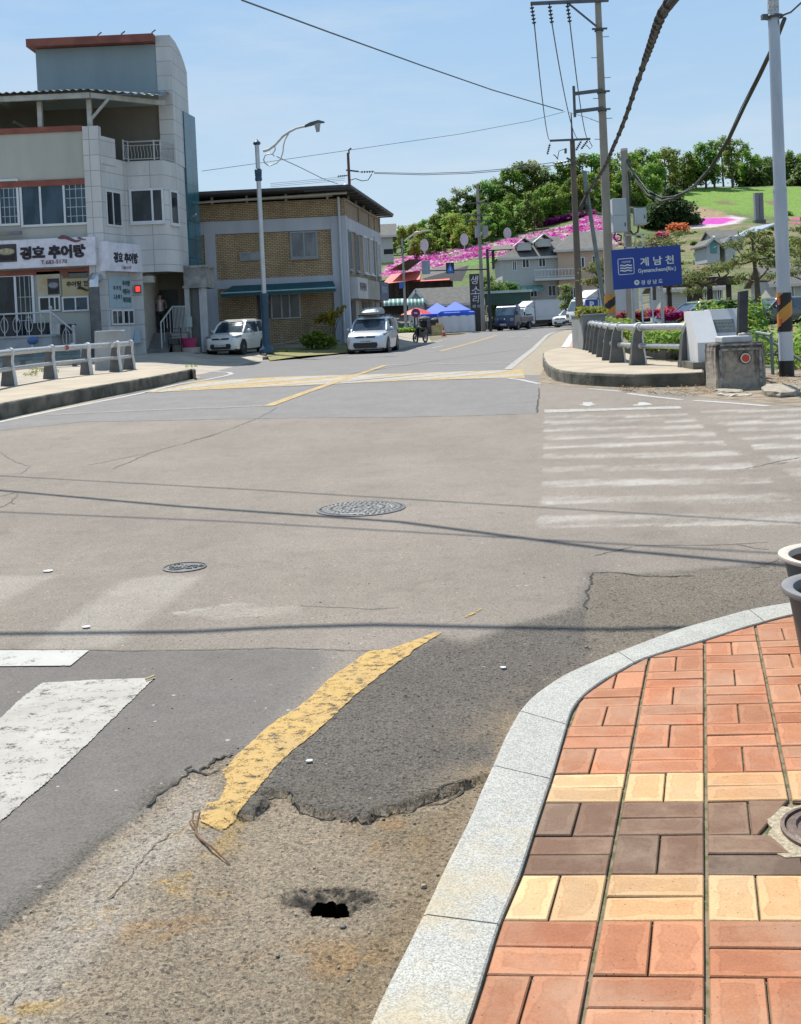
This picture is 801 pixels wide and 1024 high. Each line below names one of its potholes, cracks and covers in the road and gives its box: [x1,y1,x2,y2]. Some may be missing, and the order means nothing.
crack [145,753,234,807]
crack [239,775,474,823]
manhole cover [780,807,801,847]
manhole cover [162,562,207,573]
pothole [275,885,386,920]
crack [94,407,277,468]
manhole cover [316,501,406,517]
crack [108,833,170,899]
crack [582,572,692,610]
